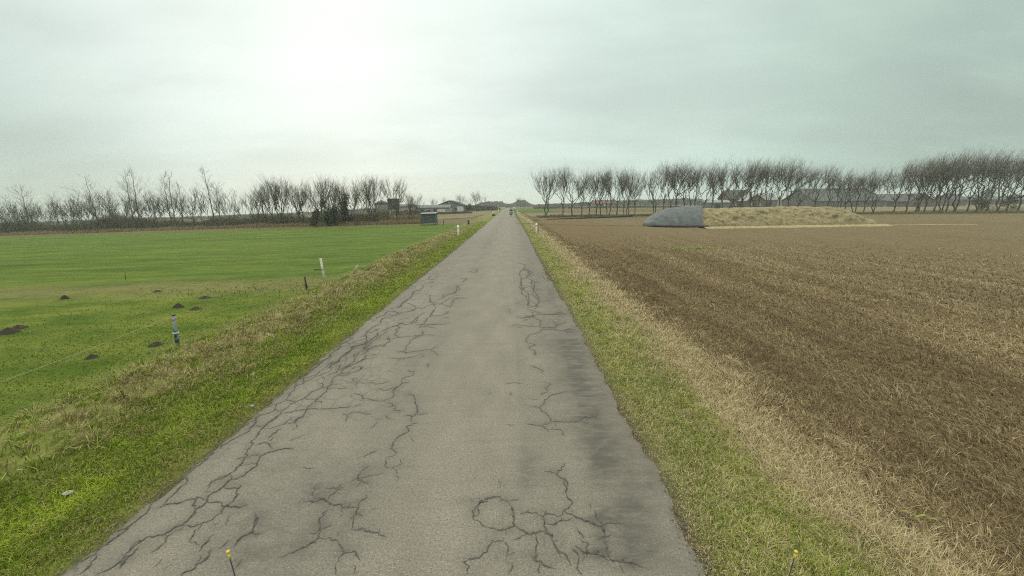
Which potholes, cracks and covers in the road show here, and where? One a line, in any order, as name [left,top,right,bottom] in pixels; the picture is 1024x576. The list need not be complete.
crack [282,270,477,573]
crack [66,276,433,574]
crack [462,463,642,574]
crack [509,264,597,435]
